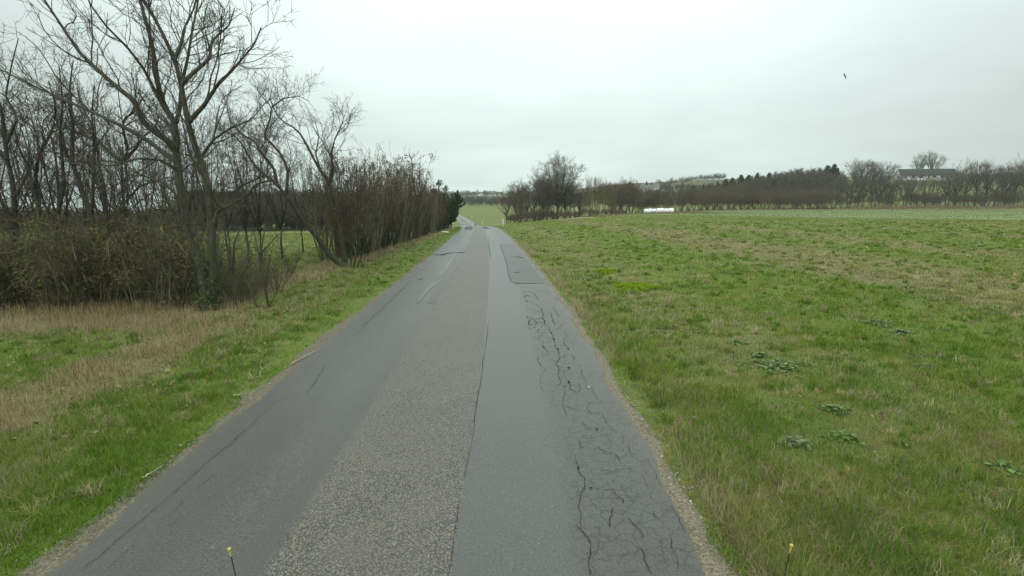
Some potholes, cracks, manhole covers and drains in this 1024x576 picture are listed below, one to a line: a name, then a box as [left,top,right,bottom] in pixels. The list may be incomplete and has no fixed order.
crack [488,241,685,576]
crack [84,372,322,569]
